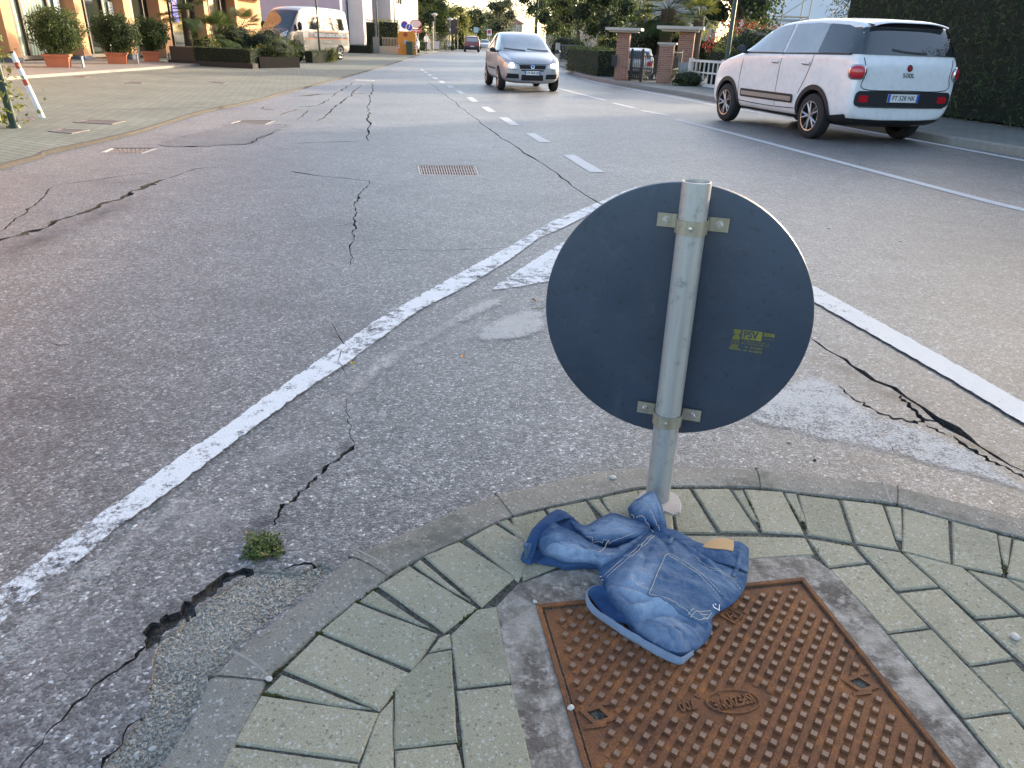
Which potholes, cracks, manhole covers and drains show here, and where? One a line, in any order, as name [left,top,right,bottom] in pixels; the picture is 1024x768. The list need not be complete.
crack [271,399,355,527]
crack [811,338,1024,478]
crack [168,83,374,147]
drain grate [417,165,479,175]
crack [19,647,150,768]
manhole cover [536,577,956,768]
crack [292,171,370,265]
crack [0,167,251,241]
